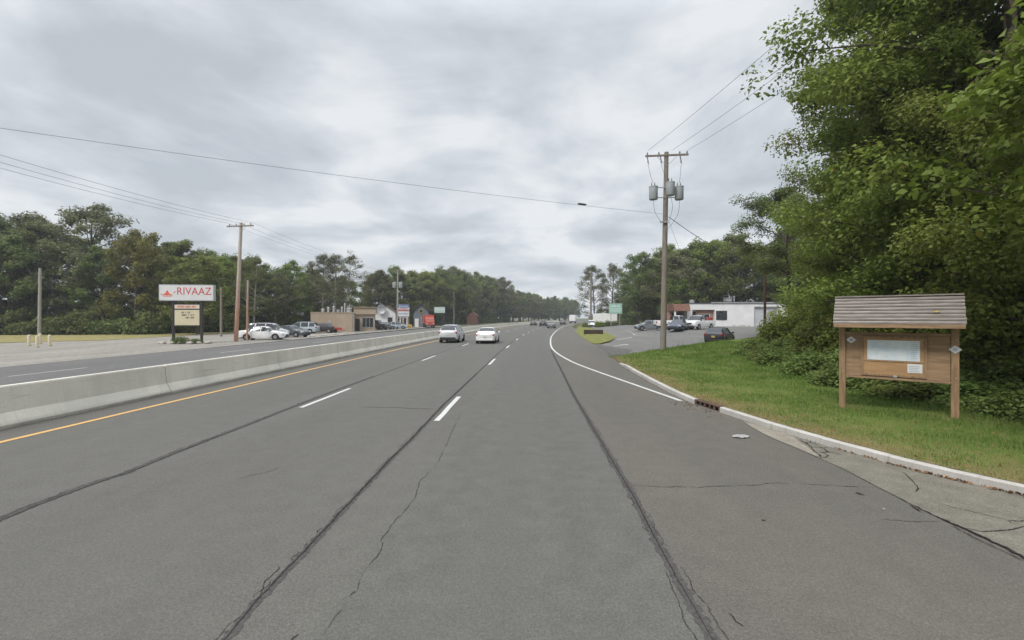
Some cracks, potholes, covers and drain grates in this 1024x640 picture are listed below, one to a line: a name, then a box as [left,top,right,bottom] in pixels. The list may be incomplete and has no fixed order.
drain grate [695,399,726,412]
crack [631,440,1024,560]
crack [291,418,459,640]
